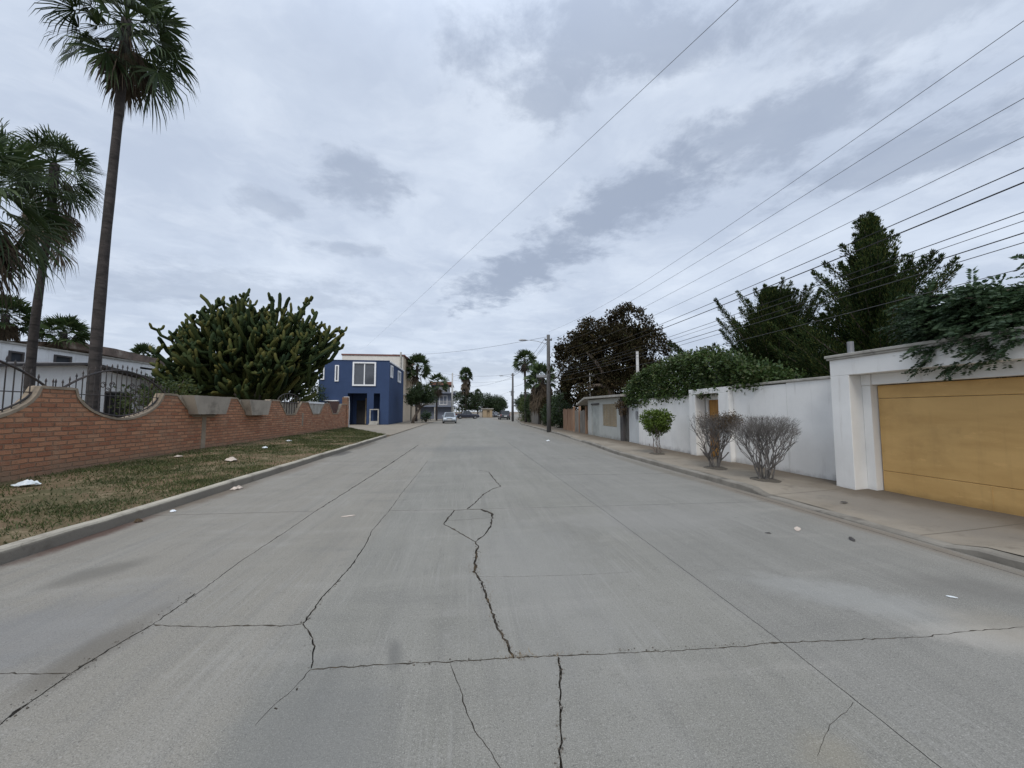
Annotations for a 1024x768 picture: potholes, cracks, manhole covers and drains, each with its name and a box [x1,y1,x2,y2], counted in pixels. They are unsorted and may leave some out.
crack [0,462,1016,768]
